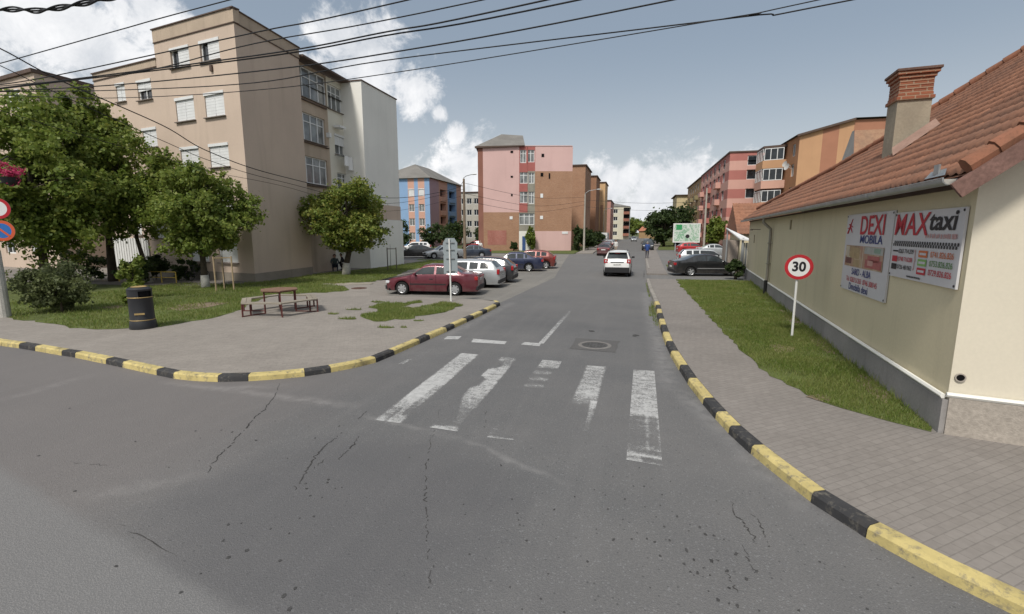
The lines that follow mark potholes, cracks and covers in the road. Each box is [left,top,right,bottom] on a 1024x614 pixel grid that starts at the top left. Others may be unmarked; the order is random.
crack [728,503,768,591]
manhole cover [569,338,620,352]
crack [208,384,280,472]
crack [295,436,359,490]
crack [423,409,441,588]
